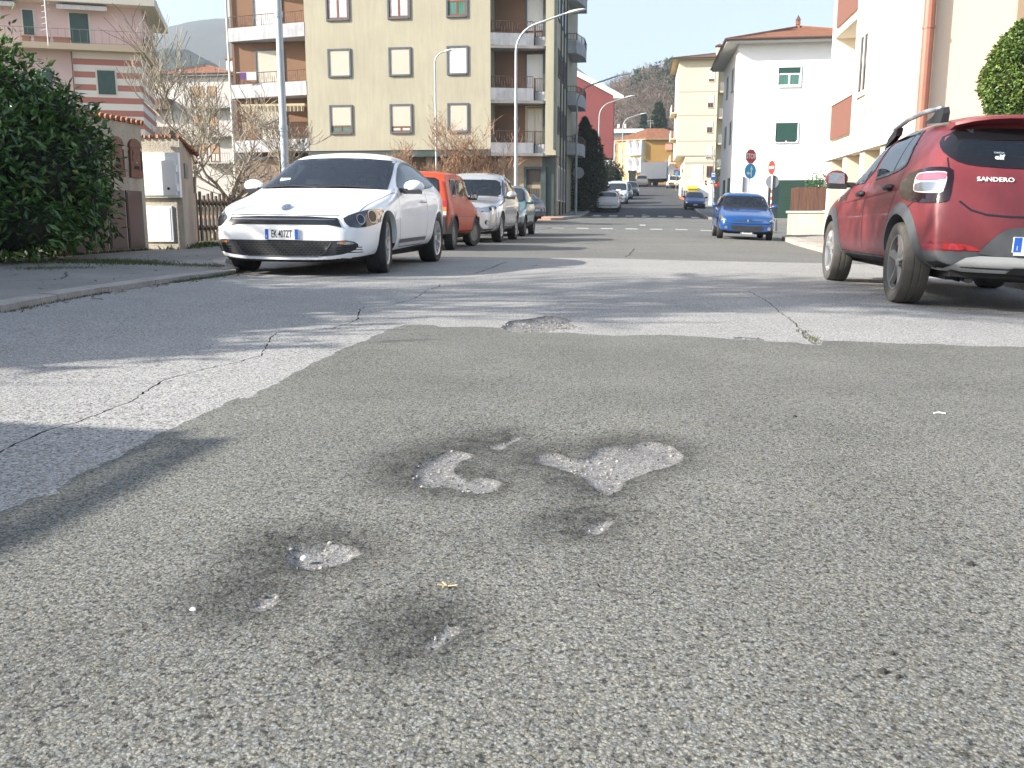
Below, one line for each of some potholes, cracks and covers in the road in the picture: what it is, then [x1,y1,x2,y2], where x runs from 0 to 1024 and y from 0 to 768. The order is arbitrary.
pothole [486,437,520,450]
pothole [500,315,582,332]
pothole [584,517,615,536]
crack [0,331,284,453]
pothole [424,623,464,652]
pothole [284,541,364,570]
pothole [533,442,685,495]
pothole [411,450,503,494]
pothole [249,594,281,612]
